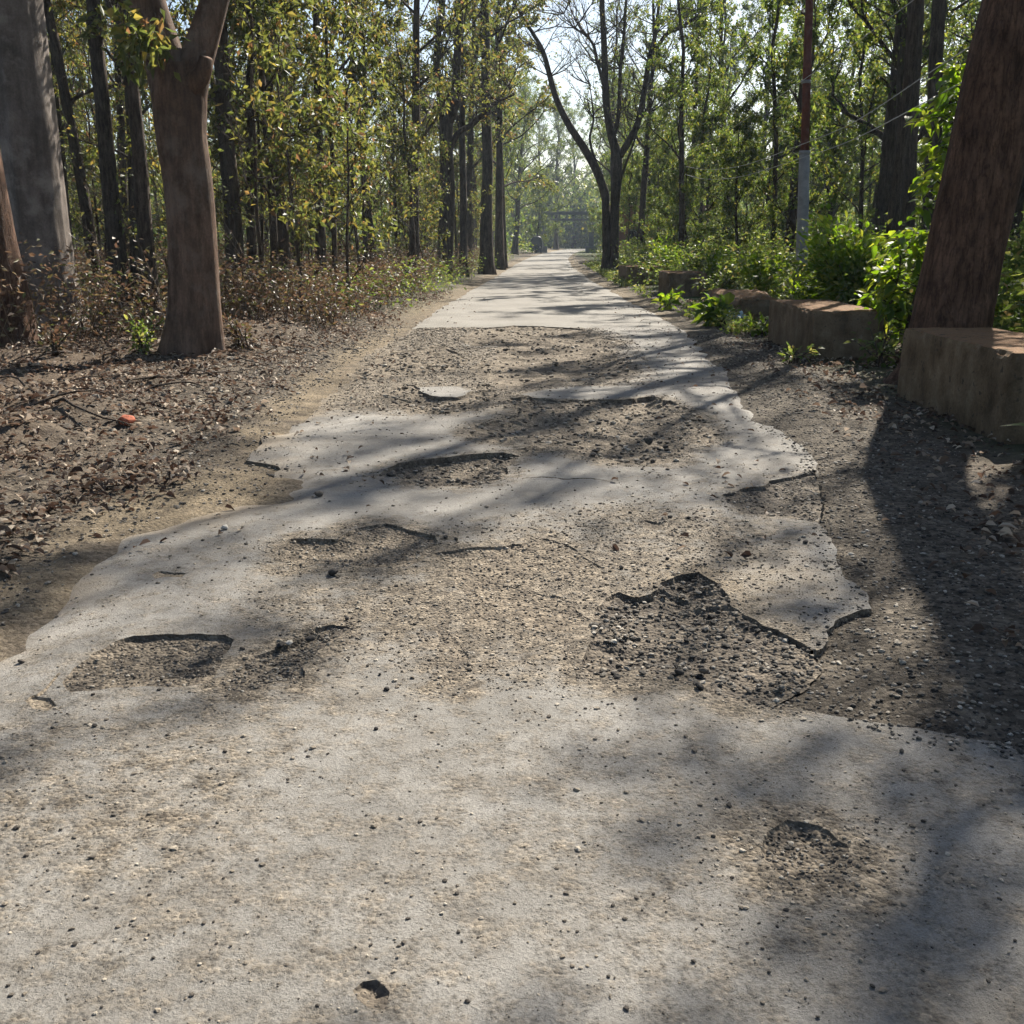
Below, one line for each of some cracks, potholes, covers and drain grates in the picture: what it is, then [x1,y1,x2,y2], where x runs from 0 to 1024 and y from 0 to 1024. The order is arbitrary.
pothole [582,572,823,707]
pothole [761,819,853,887]
pothole [377,452,519,487]
pothole [217,625,349,692]
pothole [460,325,638,390]
pothole [353,979,390,1010]
pothole [722,470,826,523]
pothole [282,523,438,572]
pothole [62,633,233,692]
